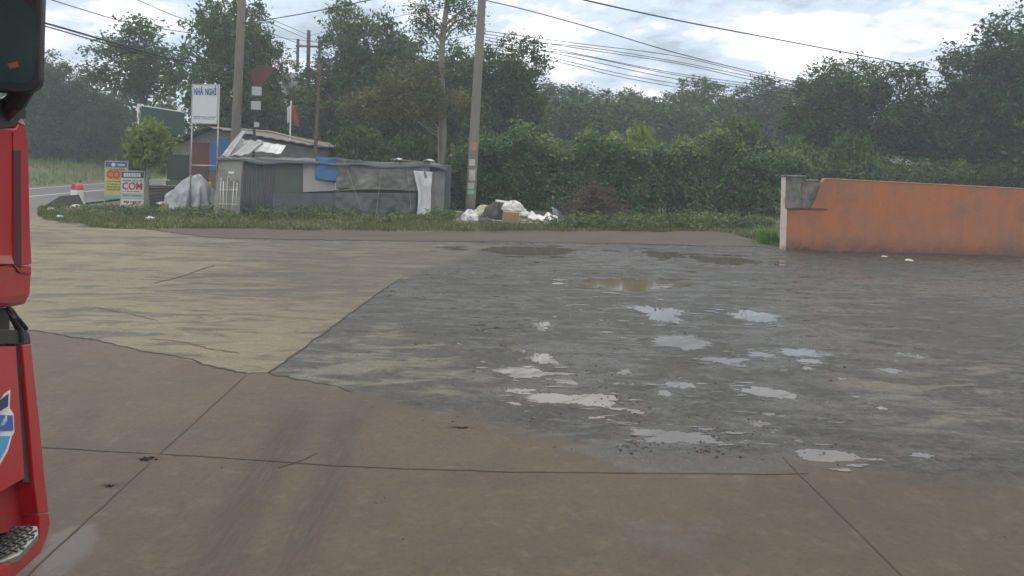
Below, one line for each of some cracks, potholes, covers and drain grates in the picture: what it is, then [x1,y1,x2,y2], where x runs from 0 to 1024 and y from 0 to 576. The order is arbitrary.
pothole [428,246,612,258]
pothole [549,277,690,300]
pothole [775,442,885,471]
pothole [502,386,643,412]
pothole [624,304,702,327]
pothole [614,424,746,450]
